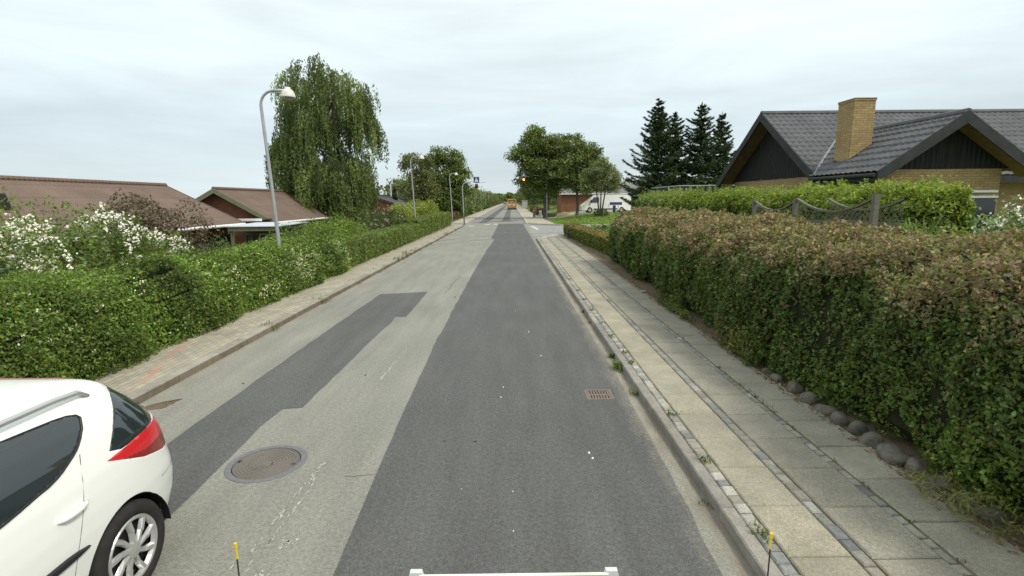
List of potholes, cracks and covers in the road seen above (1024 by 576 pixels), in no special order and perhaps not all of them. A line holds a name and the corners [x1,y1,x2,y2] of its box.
manhole cover [224,445,307,483]
drain grate [584,389,615,400]
